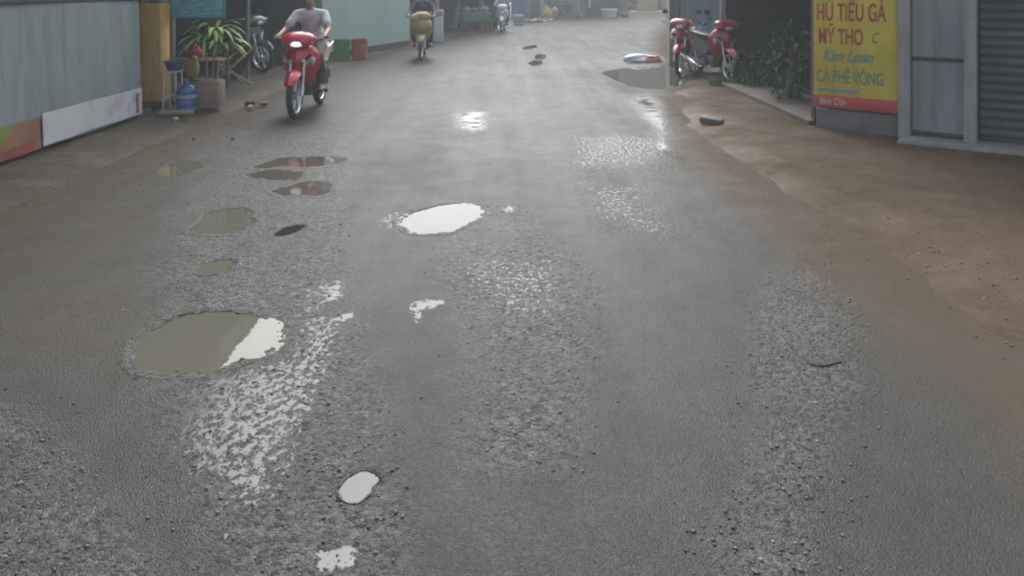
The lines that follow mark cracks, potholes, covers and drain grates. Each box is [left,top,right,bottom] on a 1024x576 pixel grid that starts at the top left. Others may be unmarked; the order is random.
pothole [118,306,296,381]
pothole [154,160,207,179]
crack [791,356,858,374]
pothole [181,205,263,237]
pothole [243,155,352,170]
pothole [596,66,689,89]
pothole [392,201,494,236]
pothole [265,180,339,198]
pothole [336,468,381,505]
pothole [271,224,306,237]
pothole [239,168,310,182]
pothole [192,258,235,276]
